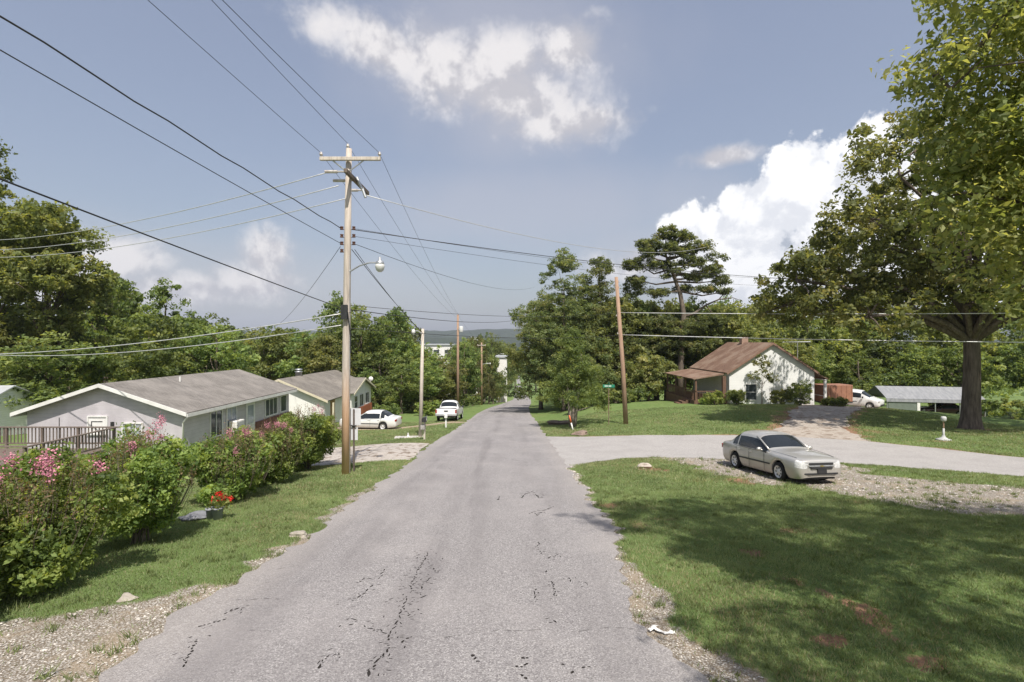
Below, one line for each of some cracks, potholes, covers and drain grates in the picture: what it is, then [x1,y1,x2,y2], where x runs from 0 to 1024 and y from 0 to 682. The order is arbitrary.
crack [173,598,269,667]
crack [520,539,588,623]
crack [337,549,443,677]
